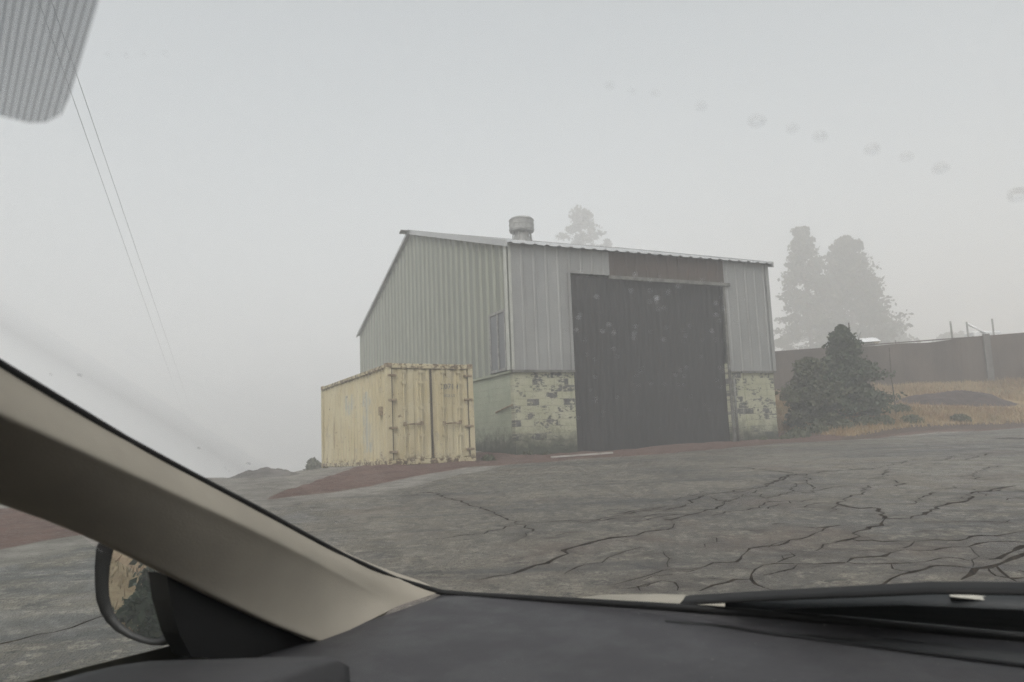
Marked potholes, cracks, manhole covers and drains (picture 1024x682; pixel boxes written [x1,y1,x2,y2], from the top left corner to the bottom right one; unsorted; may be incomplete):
crack [416,453,1024,591]
crack [0,617,99,644]
